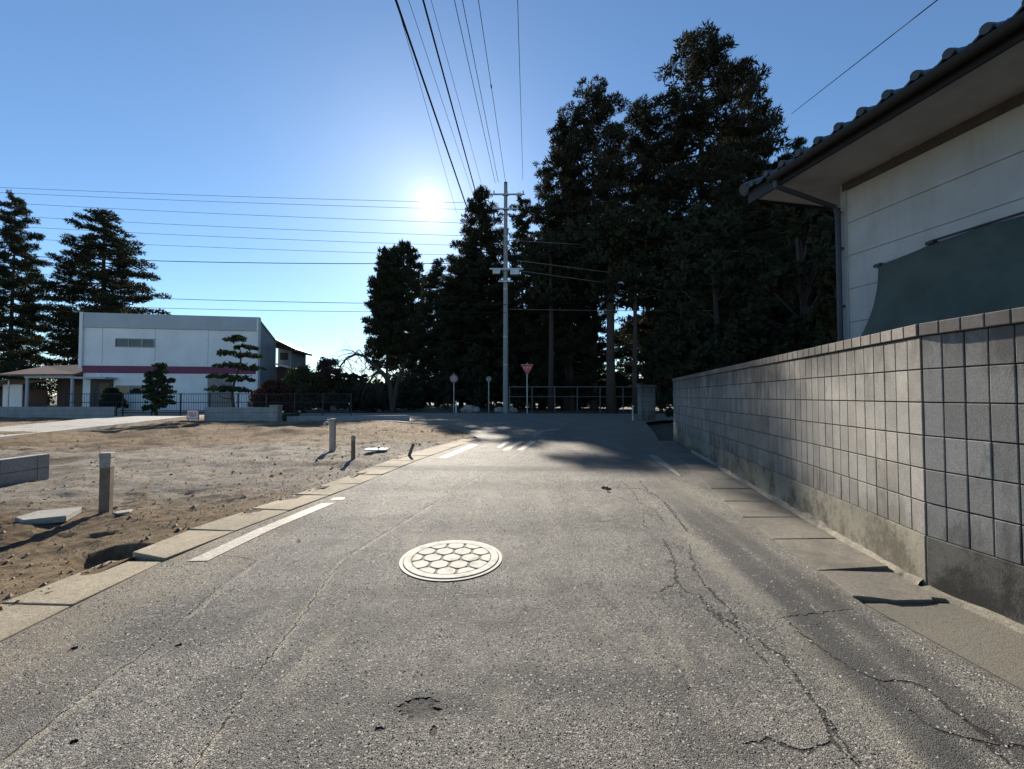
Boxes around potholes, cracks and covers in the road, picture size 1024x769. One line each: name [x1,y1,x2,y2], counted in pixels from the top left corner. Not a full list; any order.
crack [602,481,1024,768]
manhole cover [399,540,502,582]
pothole [396,697,443,721]
